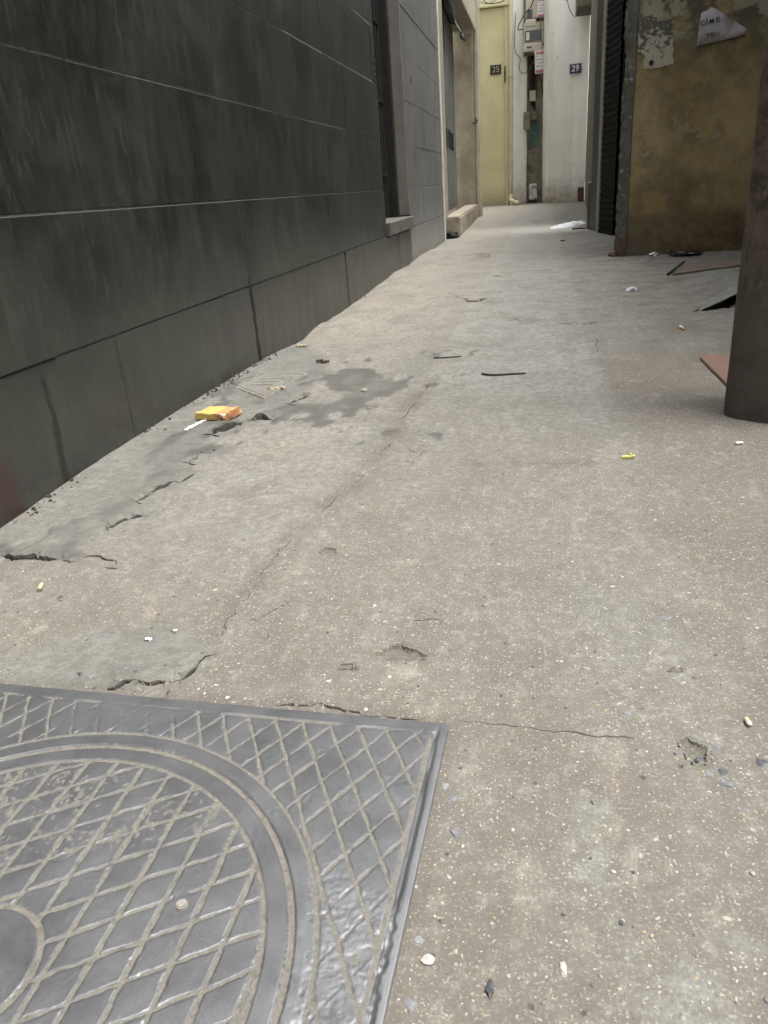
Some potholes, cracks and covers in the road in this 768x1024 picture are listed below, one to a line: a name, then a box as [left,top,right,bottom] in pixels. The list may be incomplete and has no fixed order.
crack [441,272,535,304]
crack [104,317,613,698]
crack [0,547,126,568]
manhole cover [0,683,450,1024]
pothole [674,733,712,768]
pothole [366,641,436,665]
crack [453,712,642,749]
manhole cover [236,372,308,400]
crack [271,695,423,721]
